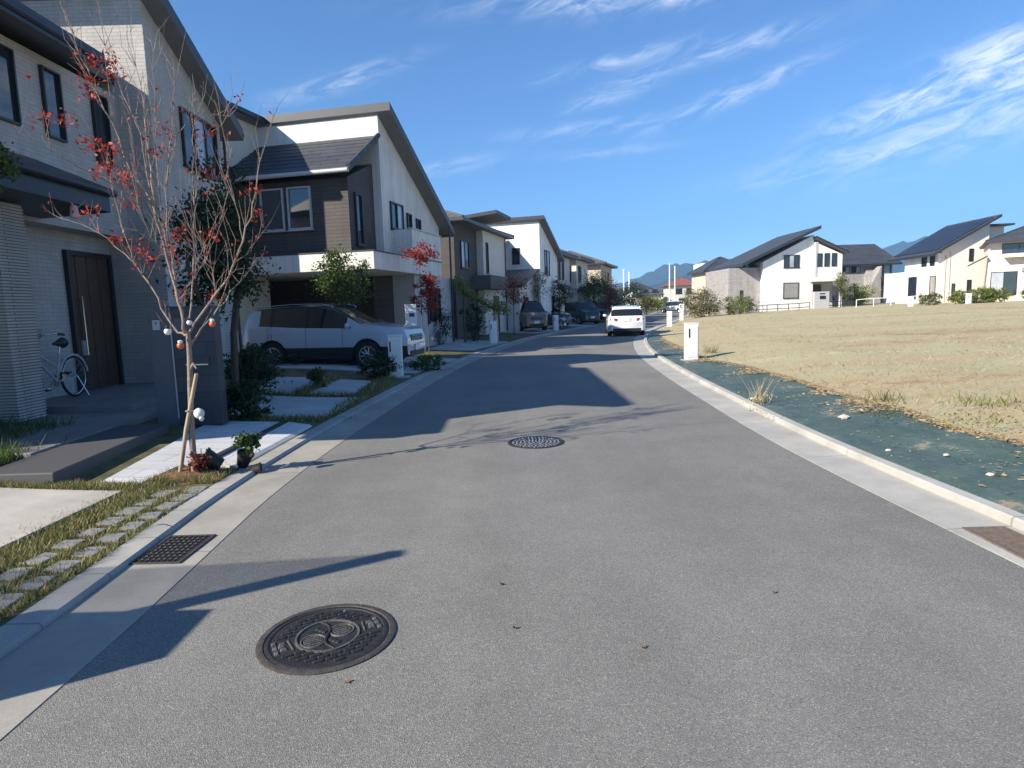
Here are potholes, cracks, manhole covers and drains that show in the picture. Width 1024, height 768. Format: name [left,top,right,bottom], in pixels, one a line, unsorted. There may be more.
manhole cover [255,604,396,676]
manhole cover [508,436,564,449]
drain grate [961,526,1024,560]
drain grate [129,534,216,565]
